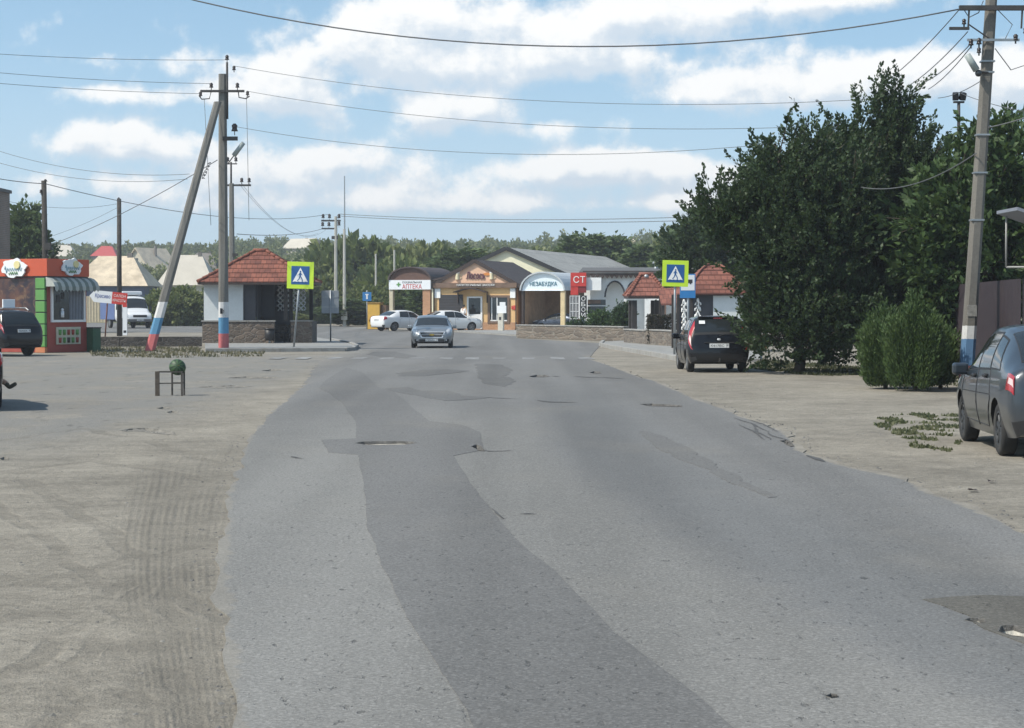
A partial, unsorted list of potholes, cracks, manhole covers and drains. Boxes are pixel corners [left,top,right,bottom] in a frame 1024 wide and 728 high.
crack [736,418,787,440]
